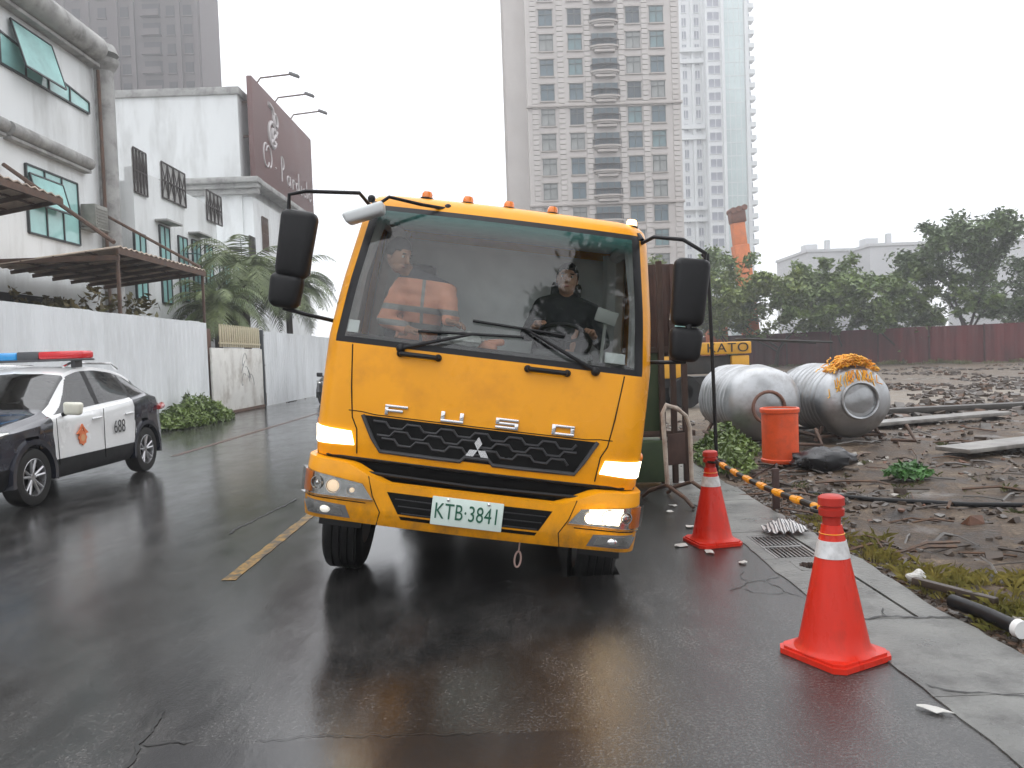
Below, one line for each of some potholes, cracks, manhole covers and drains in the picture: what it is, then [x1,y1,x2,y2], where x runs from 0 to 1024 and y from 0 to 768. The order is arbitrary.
crack [229,498,296,534]
crack [927,684,1024,697]
drain grate [747,535,814,559]
crack [123,711,191,768]
crack [865,608,956,619]
crack [730,571,802,597]
